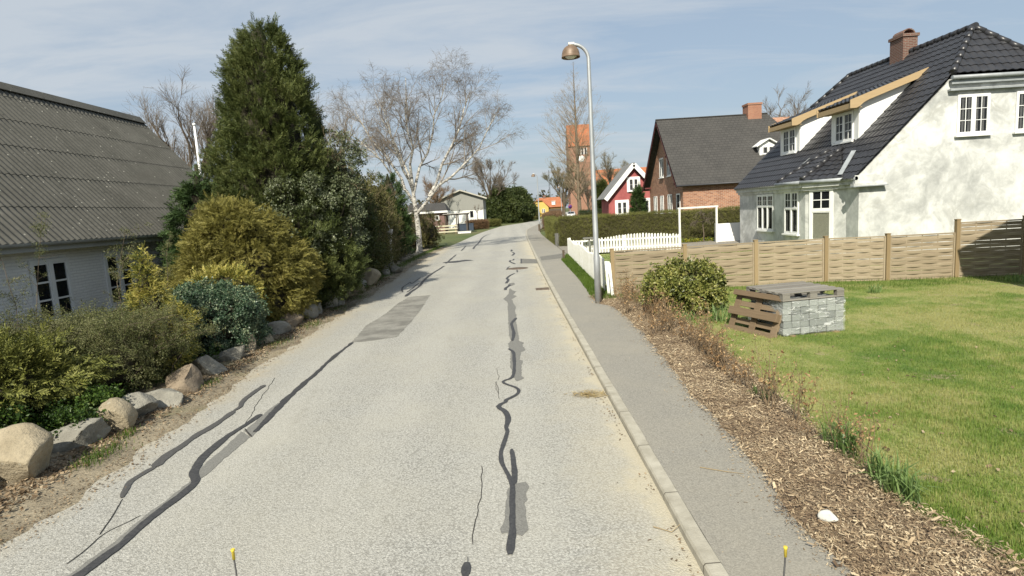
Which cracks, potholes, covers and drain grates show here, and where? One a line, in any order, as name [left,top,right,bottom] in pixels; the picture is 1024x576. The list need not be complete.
crack [66,500,141,564]
crack [472,466,483,544]
